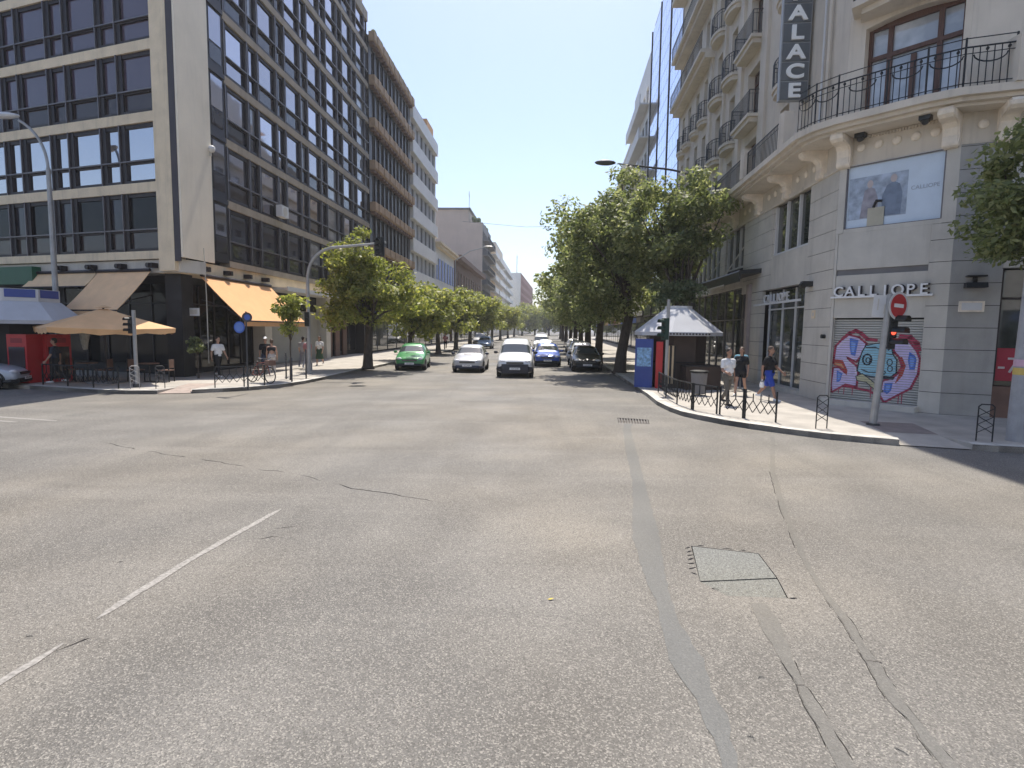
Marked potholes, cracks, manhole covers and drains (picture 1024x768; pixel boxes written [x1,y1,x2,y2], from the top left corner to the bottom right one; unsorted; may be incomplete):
manhole cover [685,545,797,599]
crack [110,443,433,502]
